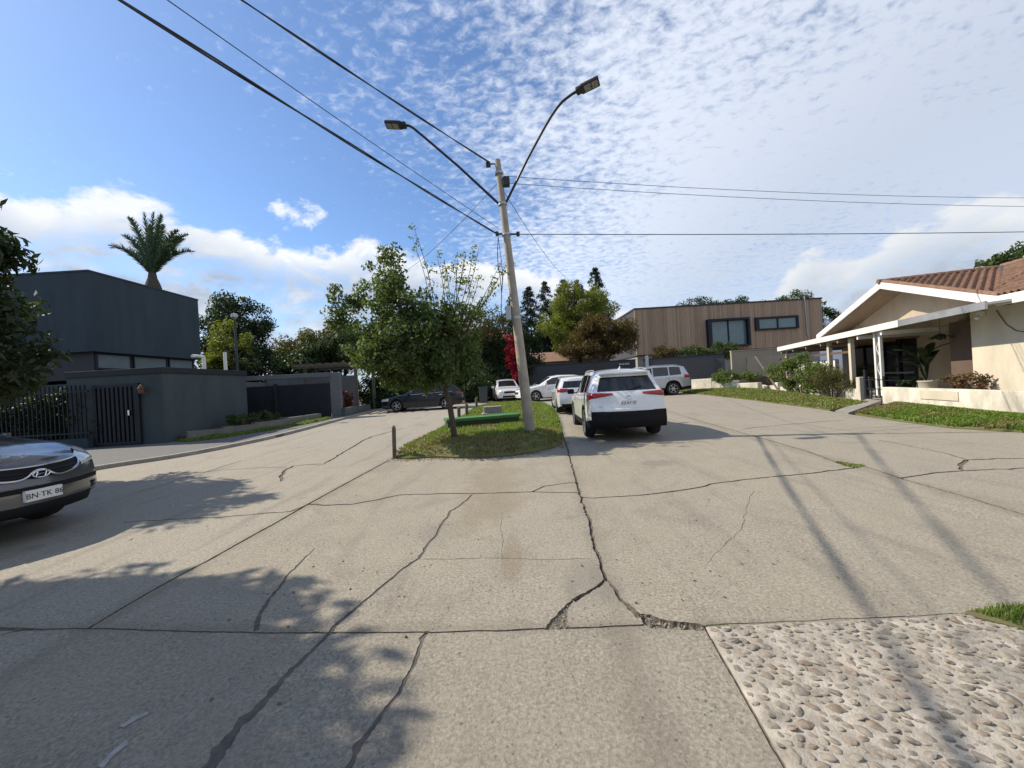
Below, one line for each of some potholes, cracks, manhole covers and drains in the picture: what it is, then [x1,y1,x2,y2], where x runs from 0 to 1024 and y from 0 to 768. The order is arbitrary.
crack [122,428,854,768]
crack [879,440,1024,479]
